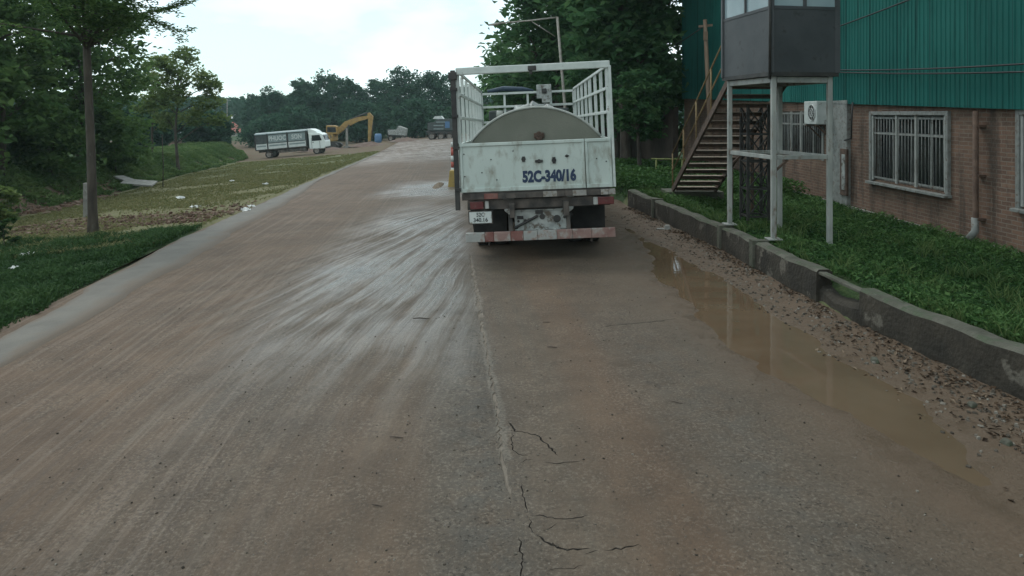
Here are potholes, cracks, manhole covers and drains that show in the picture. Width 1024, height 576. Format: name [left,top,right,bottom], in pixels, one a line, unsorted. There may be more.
crack [518,486,641,576]
crack [509,423,579,464]
